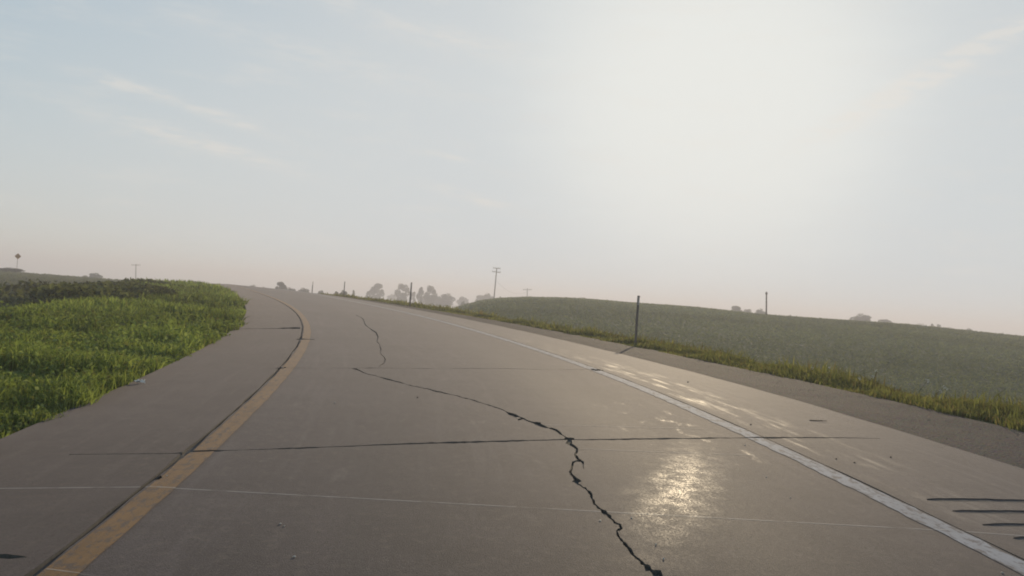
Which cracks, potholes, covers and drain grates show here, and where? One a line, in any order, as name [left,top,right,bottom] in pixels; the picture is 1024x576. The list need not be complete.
crack [355,315,663,576]
